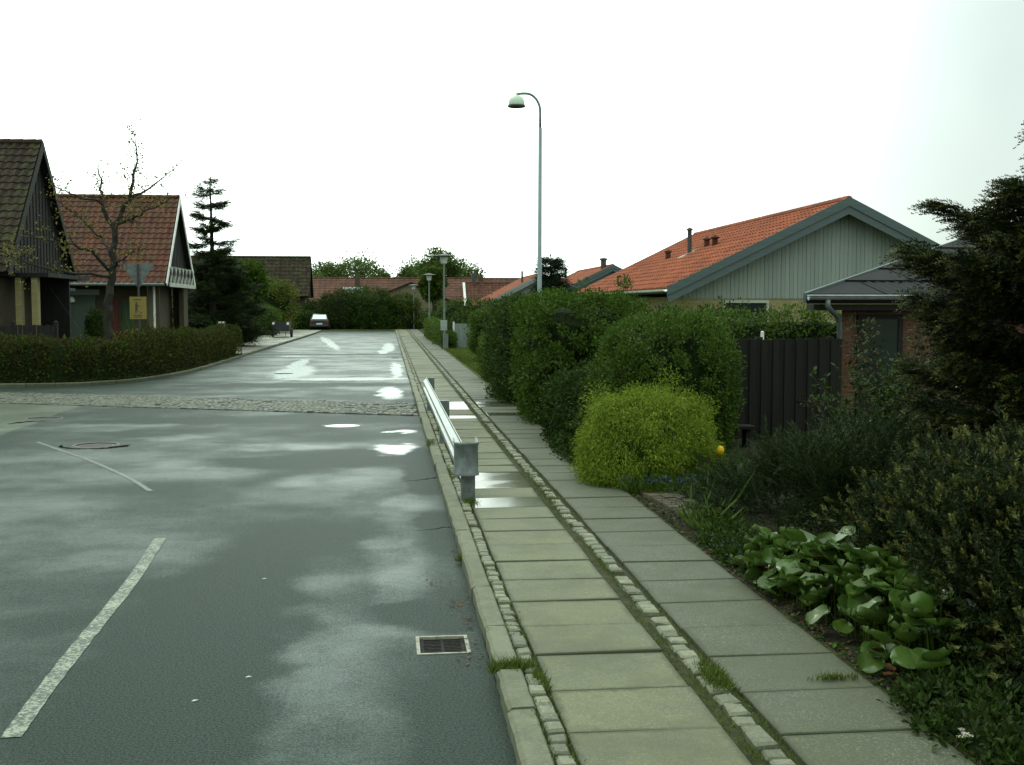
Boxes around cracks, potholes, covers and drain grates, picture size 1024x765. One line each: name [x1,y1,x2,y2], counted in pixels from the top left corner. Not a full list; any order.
drain grate [415,635,471,655]
